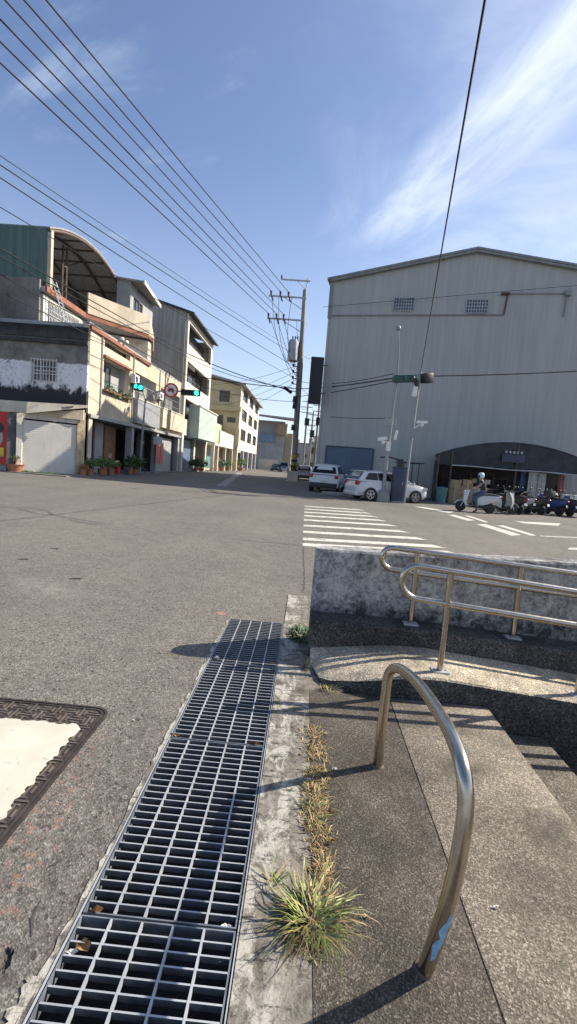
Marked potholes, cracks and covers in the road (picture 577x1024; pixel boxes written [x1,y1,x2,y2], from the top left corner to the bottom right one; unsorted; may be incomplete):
drain grate [27,915,236,1024]
crack [0,507,111,525]
drain grate [83,738,264,940]
drain grate [209,619,283,668]
manhole cover [0,697,108,849]
drain grate [171,661,276,754]
